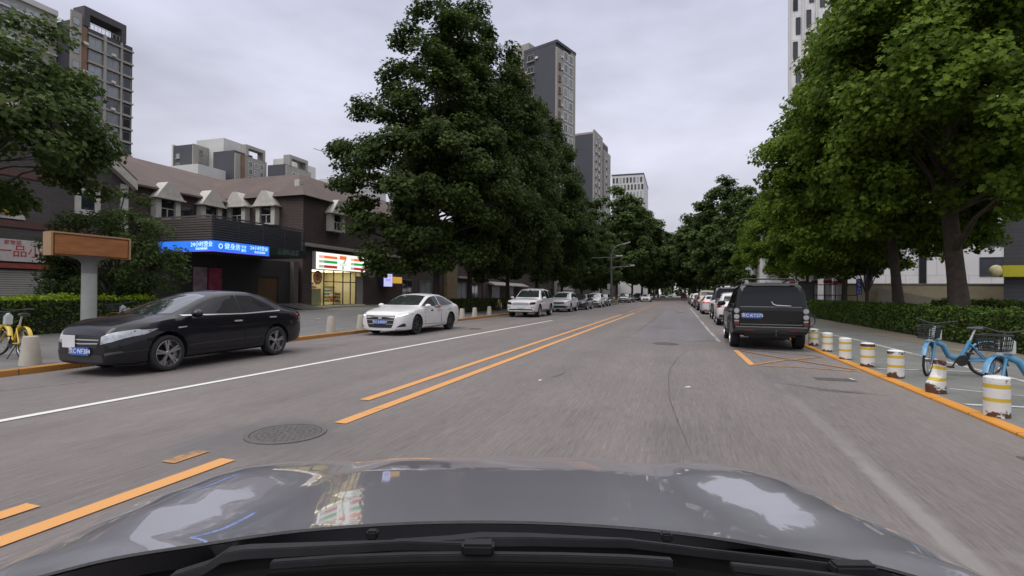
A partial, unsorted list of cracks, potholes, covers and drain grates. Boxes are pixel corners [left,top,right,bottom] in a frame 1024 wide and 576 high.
manhole cover [243,423,327,445]
